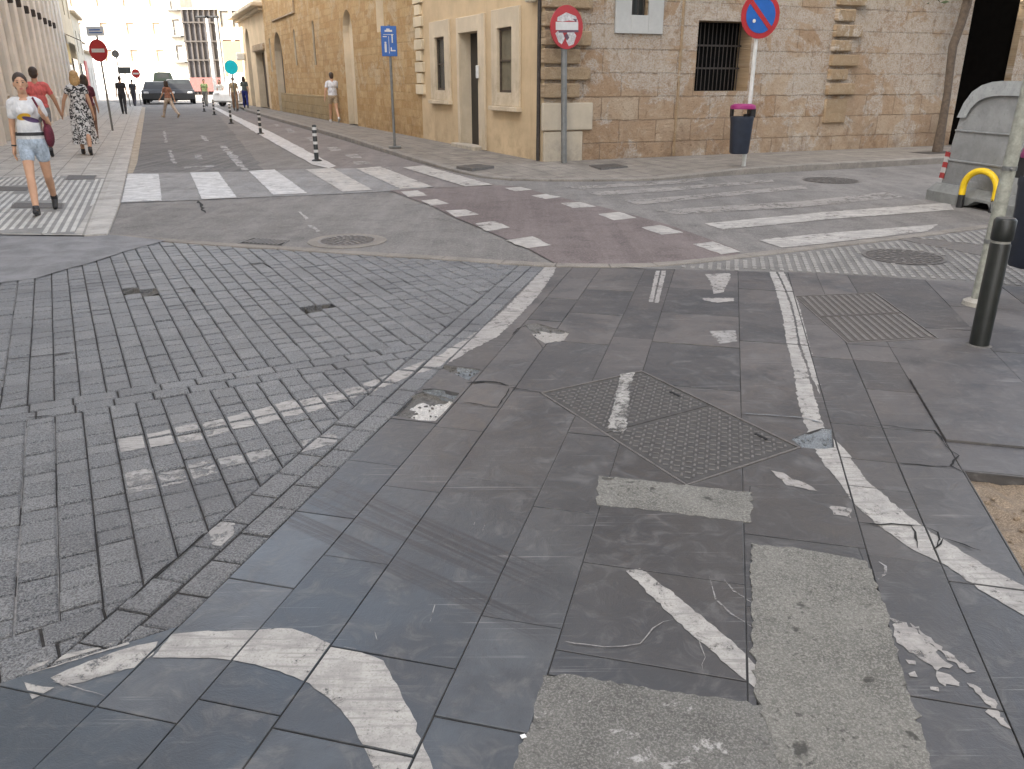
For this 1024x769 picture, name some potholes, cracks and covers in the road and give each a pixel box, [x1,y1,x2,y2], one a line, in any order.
crack [566,620,669,647]
crack [861,522,979,550]
pothole [397,392,454,421]
pothole [792,429,834,449]
manhole cover [862,249,947,265]
manhole cover [307,234,387,249]
manhole cover [540,370,801,485]
pothole [423,390,458,402]
drain grate [238,238,290,246]
pothole [443,365,479,380]
